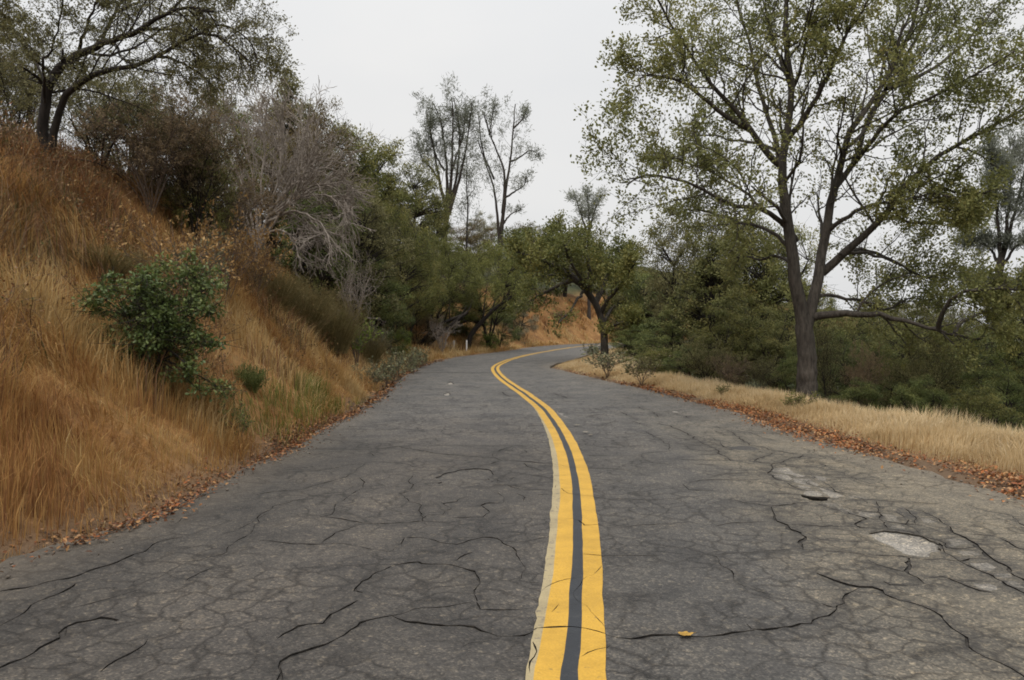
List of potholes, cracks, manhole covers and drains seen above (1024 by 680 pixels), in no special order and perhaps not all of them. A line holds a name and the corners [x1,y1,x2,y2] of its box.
crack [0,407,1024,680]
